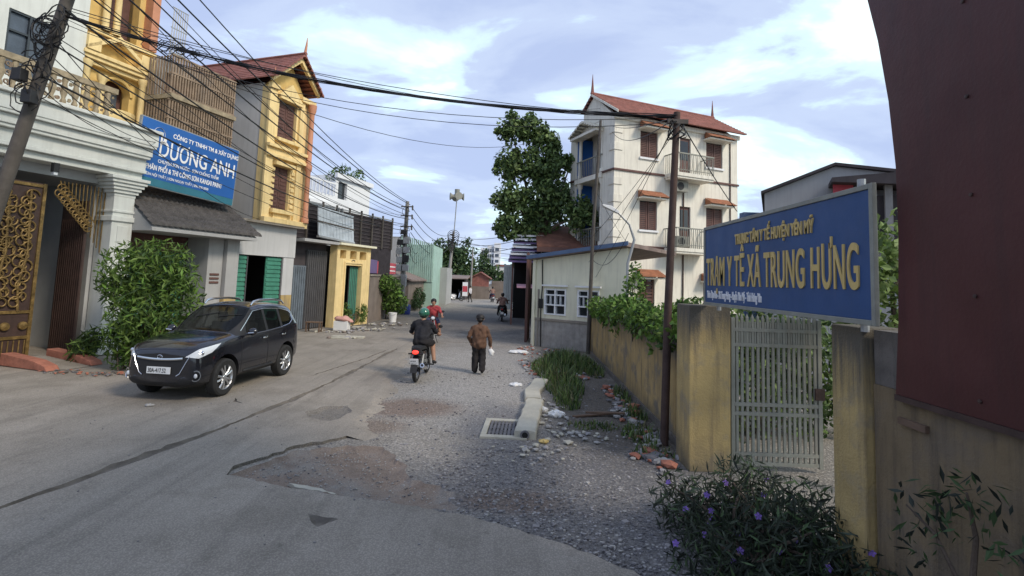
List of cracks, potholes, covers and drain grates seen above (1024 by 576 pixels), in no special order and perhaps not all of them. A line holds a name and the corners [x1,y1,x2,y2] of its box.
pothole [307,513,338,527]
pothole [231,445,458,512]
crack [0,344,397,509]
drain grate [479,418,527,440]
